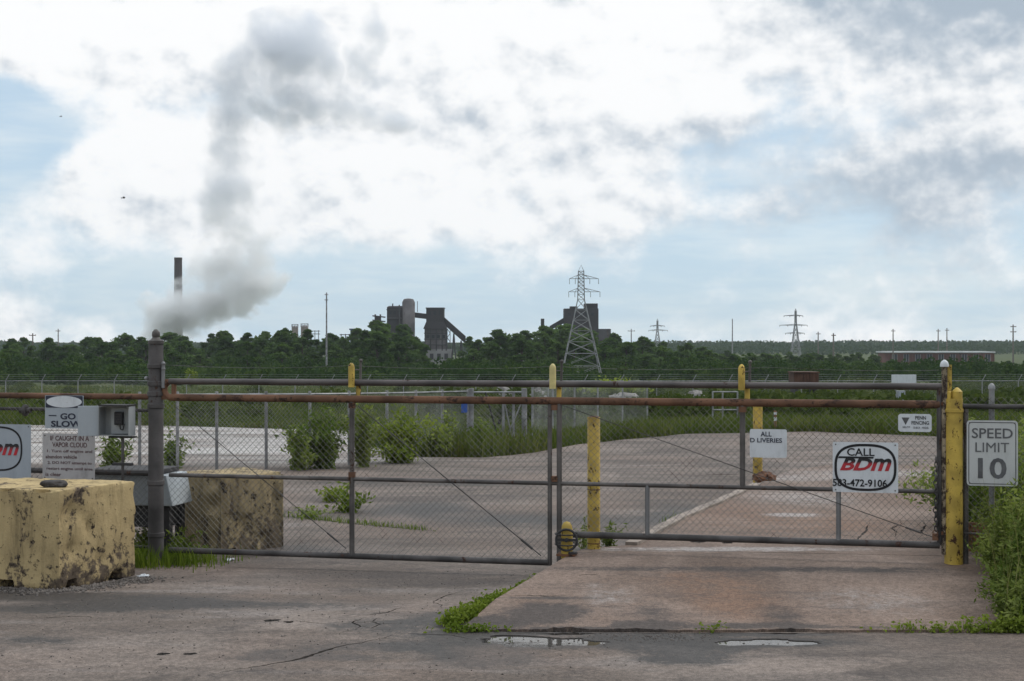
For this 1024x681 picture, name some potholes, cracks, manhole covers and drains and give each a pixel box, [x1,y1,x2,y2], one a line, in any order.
pothole [481,635,609,647]
crack [226,607,402,672]
